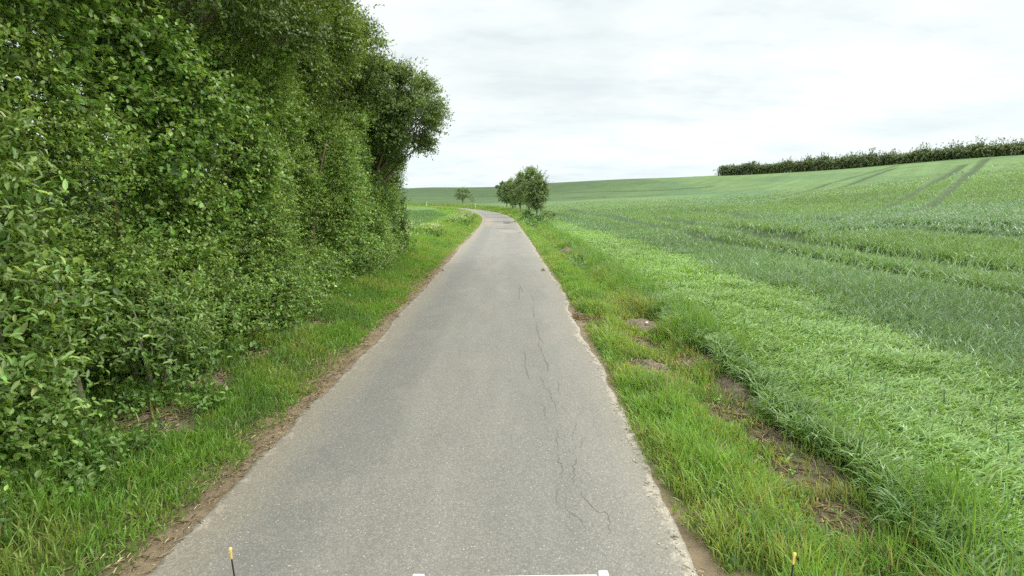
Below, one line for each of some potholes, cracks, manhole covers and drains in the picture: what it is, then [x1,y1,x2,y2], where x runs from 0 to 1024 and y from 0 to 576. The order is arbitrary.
crack [518,286,611,536]
